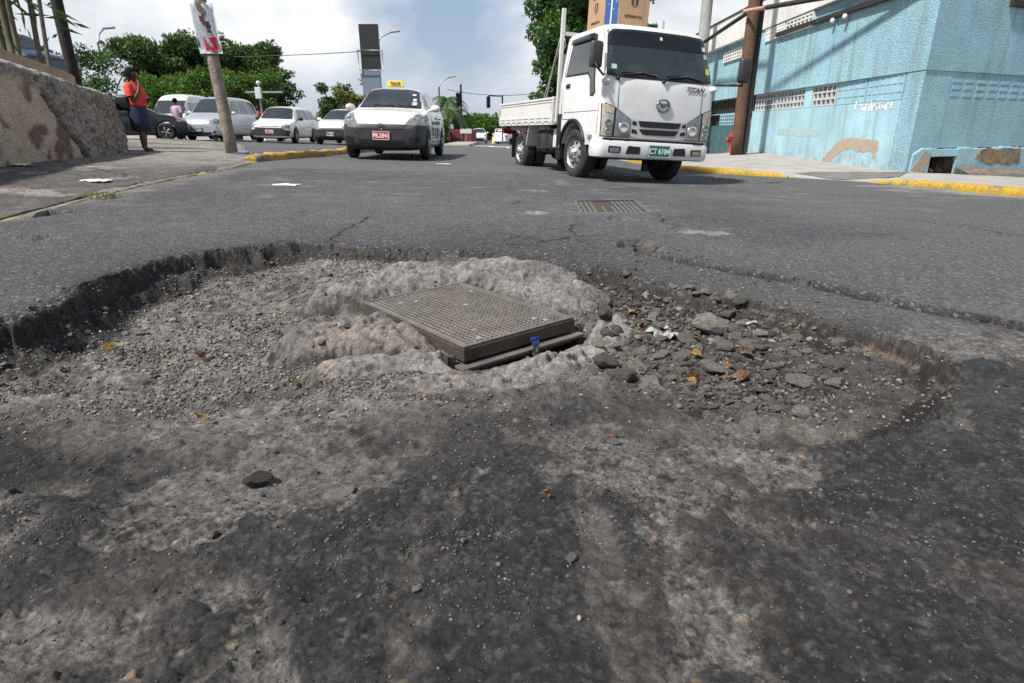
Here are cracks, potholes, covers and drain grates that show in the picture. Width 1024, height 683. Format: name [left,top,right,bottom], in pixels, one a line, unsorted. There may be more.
manhole cover [360,282,584,371]
pothole [0,240,979,532]
